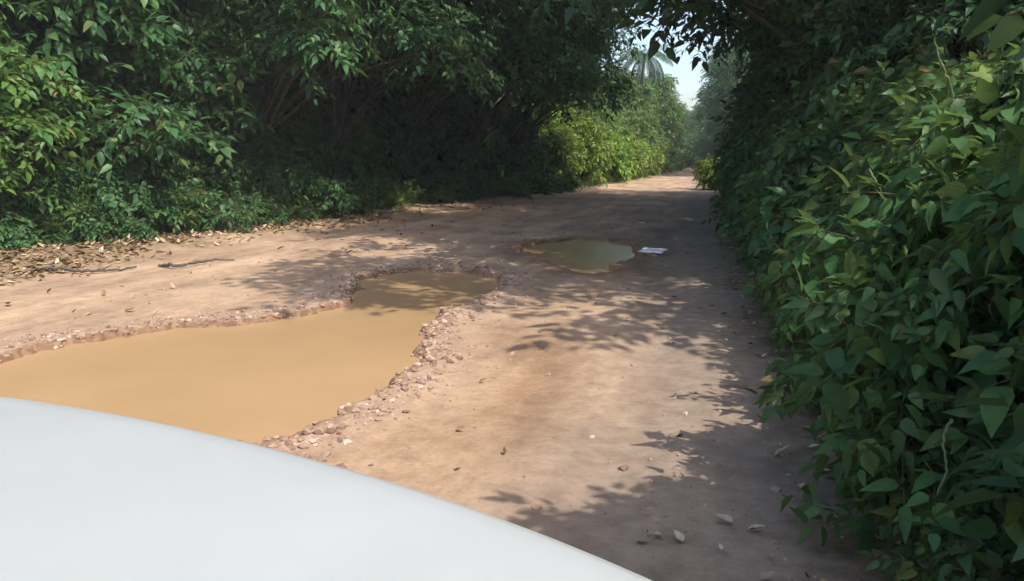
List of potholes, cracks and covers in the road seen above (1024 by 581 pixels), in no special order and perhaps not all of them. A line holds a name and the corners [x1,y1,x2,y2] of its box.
pothole [520,236,642,272]
pothole [0,267,507,442]
